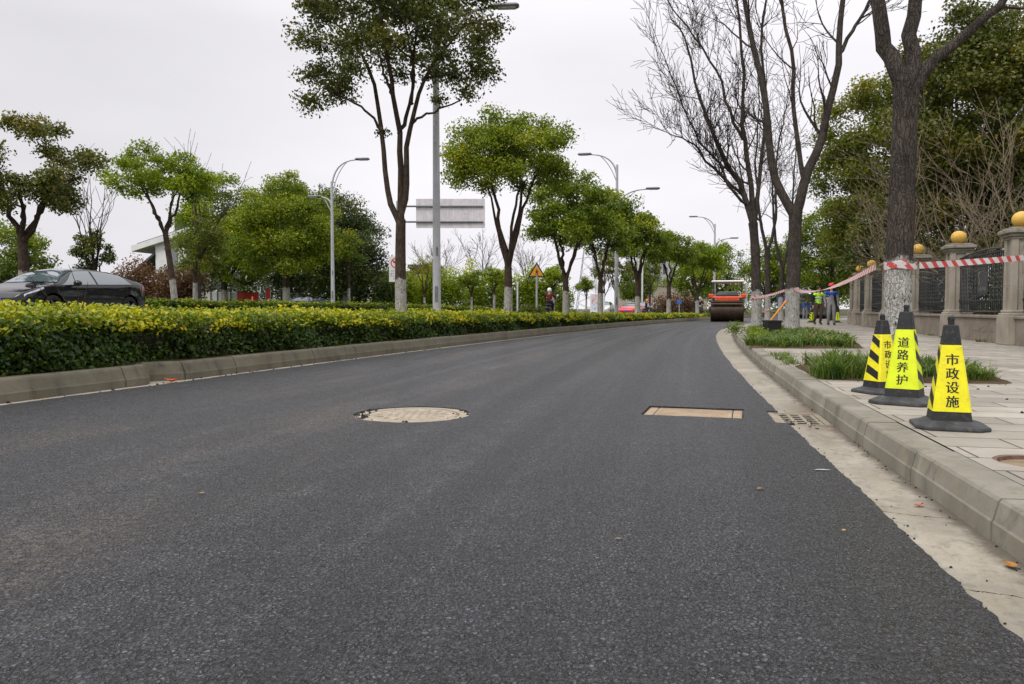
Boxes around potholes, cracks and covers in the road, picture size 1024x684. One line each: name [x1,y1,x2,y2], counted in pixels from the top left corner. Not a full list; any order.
utility cover [993,455,1024,467]
manhole cover [353,407,470,422]
manhole cover [645,407,743,418]
drain grate [767,412,833,426]
